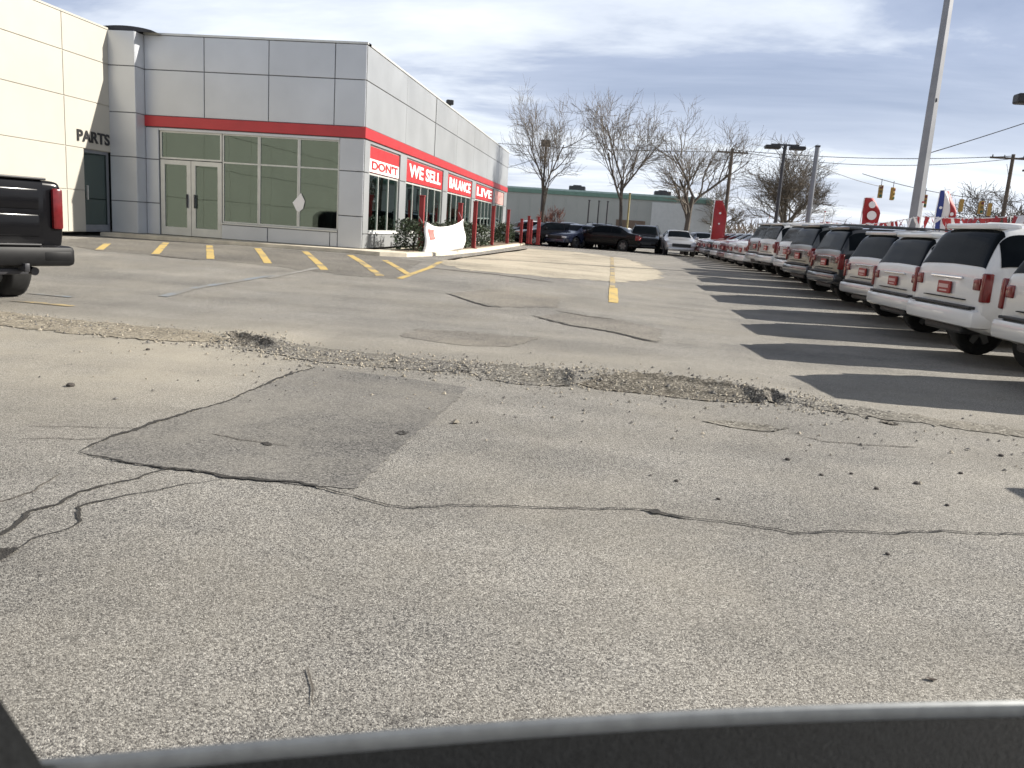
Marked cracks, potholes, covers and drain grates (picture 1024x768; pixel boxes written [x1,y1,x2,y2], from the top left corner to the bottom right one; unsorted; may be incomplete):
pothole [227,331,274,349]
crack [533,310,656,342]
crack [0,366,1024,548]
pothole [762,388,786,404]
pothole [578,372,764,403]
